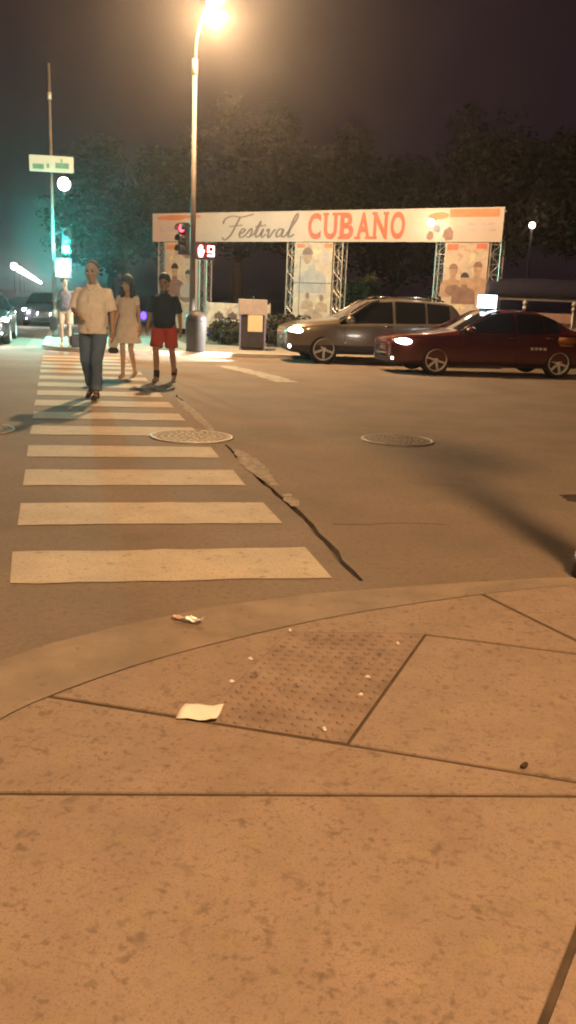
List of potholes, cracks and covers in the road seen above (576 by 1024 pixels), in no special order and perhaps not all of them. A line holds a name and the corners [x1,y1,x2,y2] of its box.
manhole cover [0,424,15,434]
manhole cover [361,434,434,447]
manhole cover [150,430,233,444]
crack [225,445,448,581]
